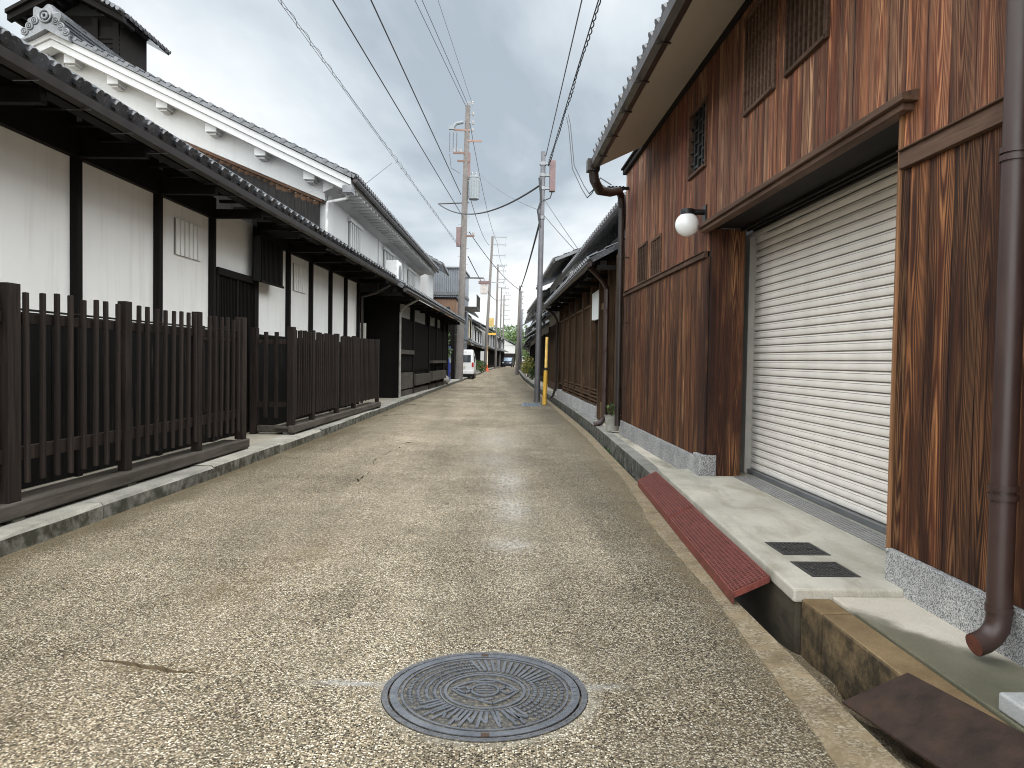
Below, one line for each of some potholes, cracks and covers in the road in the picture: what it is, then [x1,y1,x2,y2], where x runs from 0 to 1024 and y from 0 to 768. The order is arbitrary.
manhole cover [381,652,588,743]
drain grate [669,507,770,604]
crack [98,660,196,674]
manhole cover [765,542,831,556]
manhole cover [790,561,861,577]
drain grate [638,471,693,524]
